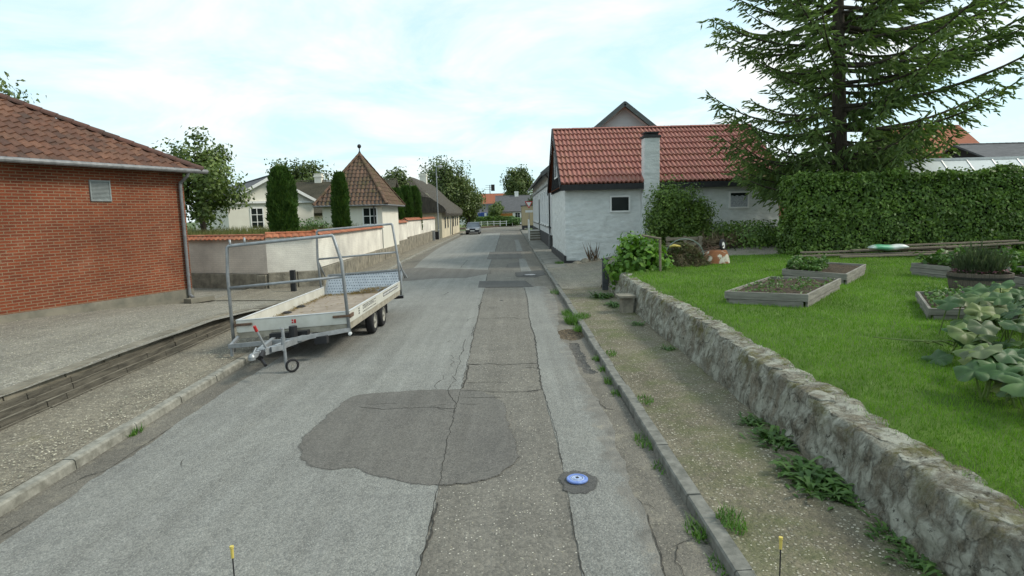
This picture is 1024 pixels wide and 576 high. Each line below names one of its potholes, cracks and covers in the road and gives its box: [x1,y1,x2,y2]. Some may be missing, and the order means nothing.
manhole cover [567,474,588,484]
crack [359,288,585,576]
crack [639,500,695,576]
